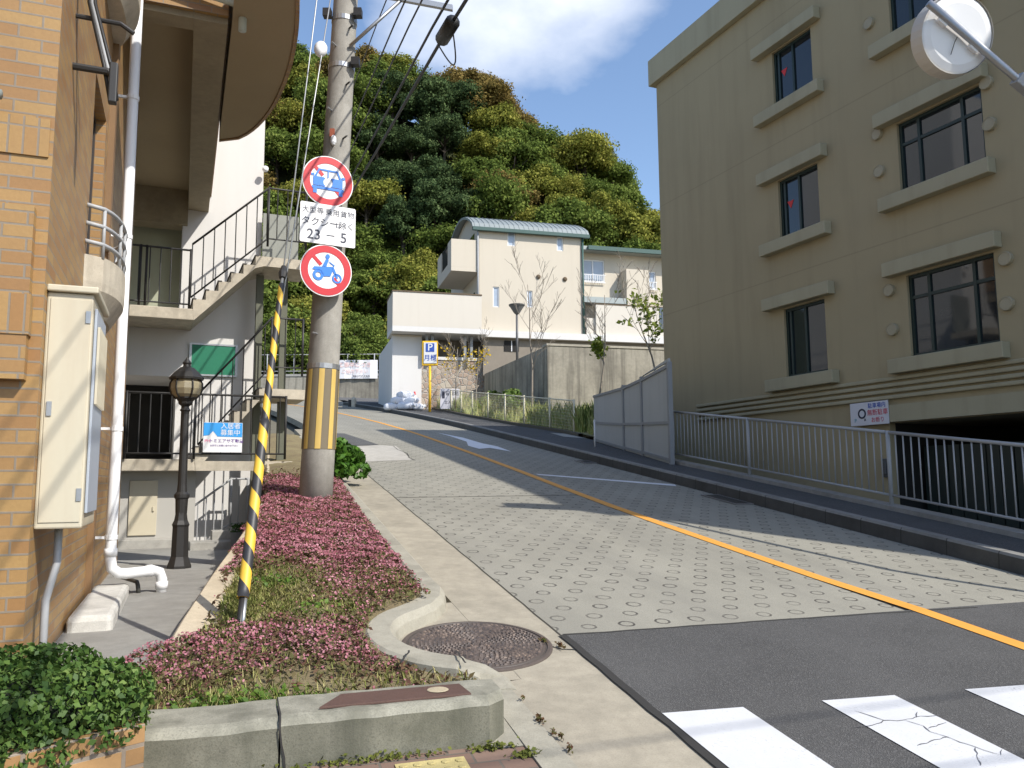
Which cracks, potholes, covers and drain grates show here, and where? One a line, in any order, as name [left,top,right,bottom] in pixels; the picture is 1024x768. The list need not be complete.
drain grate [701,494,754,505]
manhole cover [402,621,553,672]
crack [857,712,1002,765]
